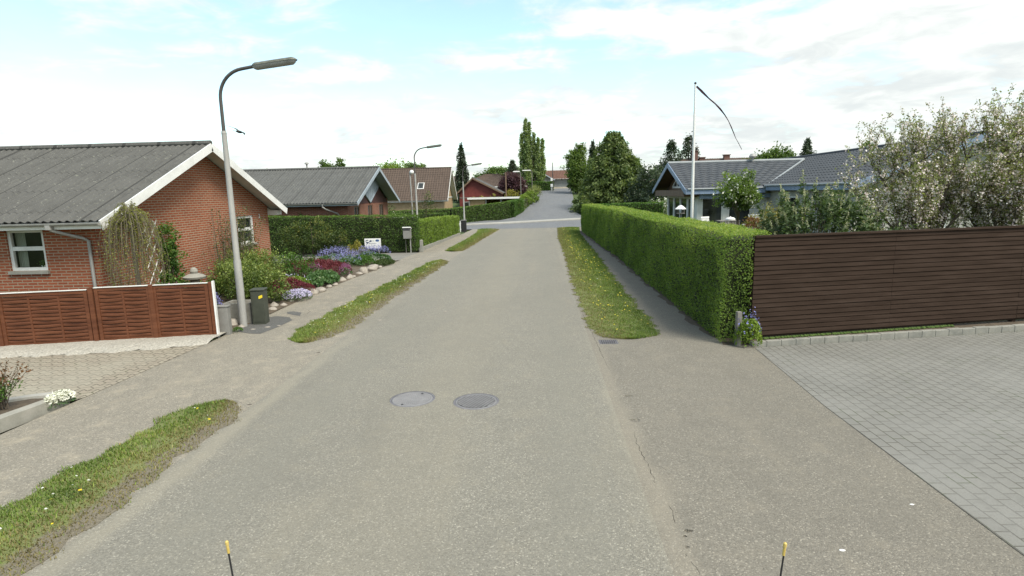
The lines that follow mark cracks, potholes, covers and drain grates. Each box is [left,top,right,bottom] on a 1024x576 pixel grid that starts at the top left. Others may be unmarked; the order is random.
manhole cover [390,391,435,407]
manhole cover [453,393,499,410]
